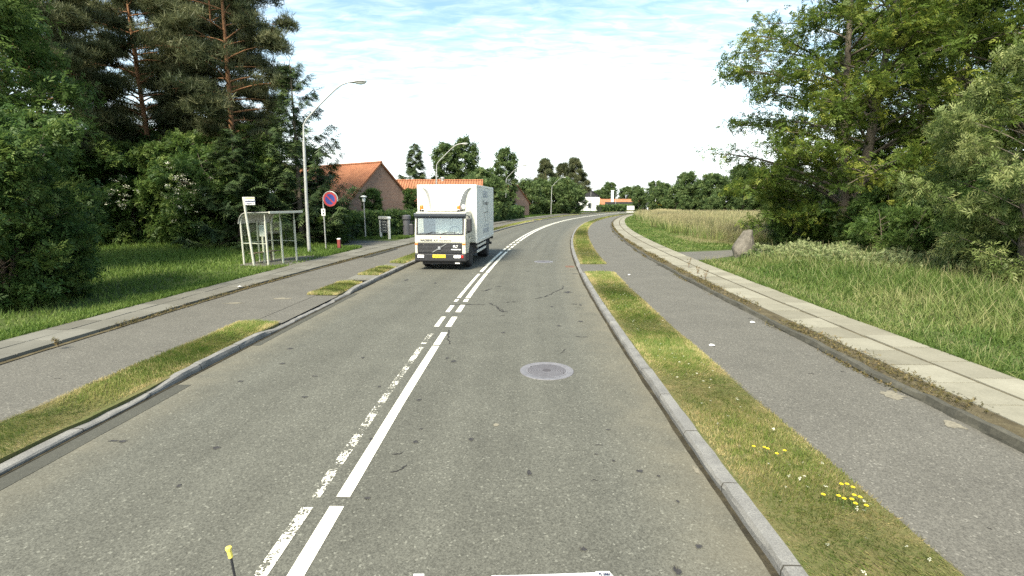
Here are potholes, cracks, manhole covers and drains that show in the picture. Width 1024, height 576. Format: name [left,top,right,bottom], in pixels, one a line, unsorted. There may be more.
crack [449,286,507,316]
manhole cover [520,362,574,380]
